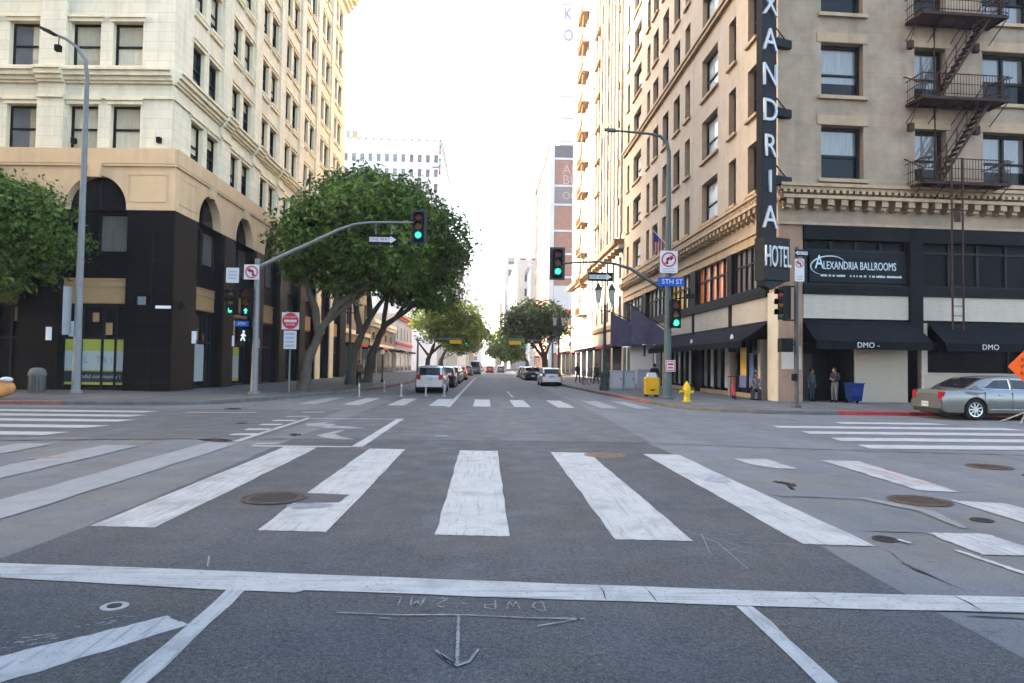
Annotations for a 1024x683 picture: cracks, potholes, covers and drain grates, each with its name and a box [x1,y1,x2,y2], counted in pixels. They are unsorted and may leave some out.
manhole cover [240,491,307,505]
manhole cover [887,495,954,507]
manhole cover [99,601,129,611]
crack [889,551,1024,633]
